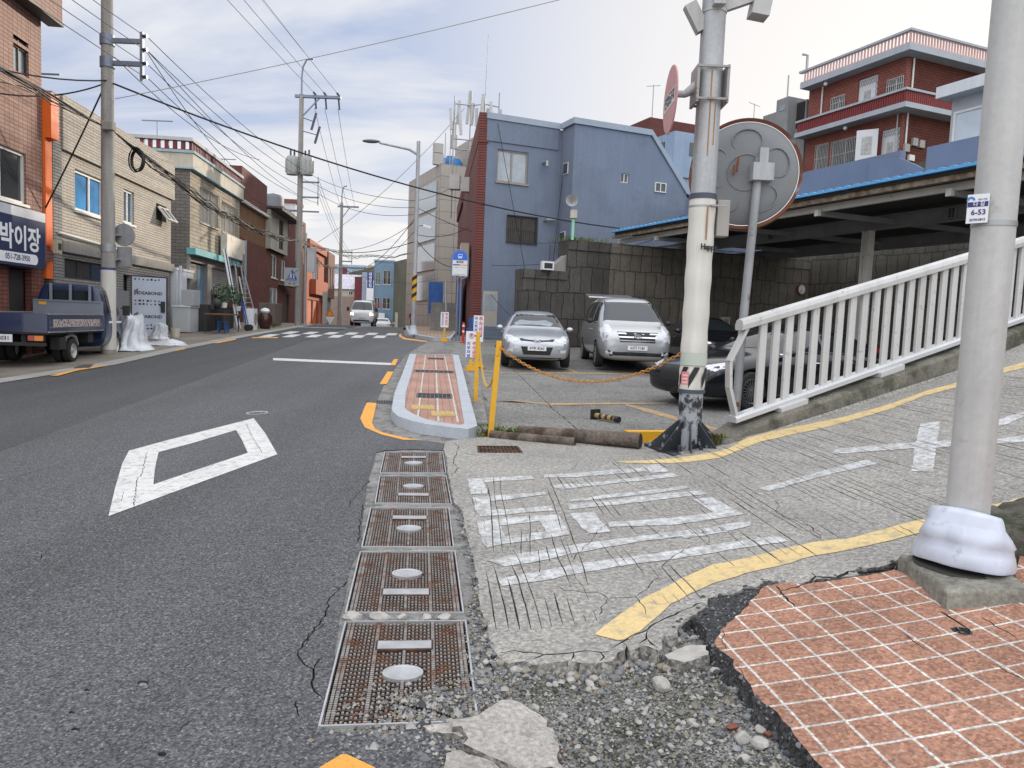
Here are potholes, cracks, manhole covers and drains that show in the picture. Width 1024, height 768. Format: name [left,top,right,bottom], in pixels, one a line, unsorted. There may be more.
drain grate [380,451,446,474]
crack [294,582,346,717]
drain grate [318,620,478,729]
crack [349,480,370,542]
drain grate [477,445,523,453]
crack [500,531,710,662]
drain grate [375,475,452,522]
drain grate [345,551,464,615]
crack [776,563,896,607]
drain grate [361,507,454,549]
